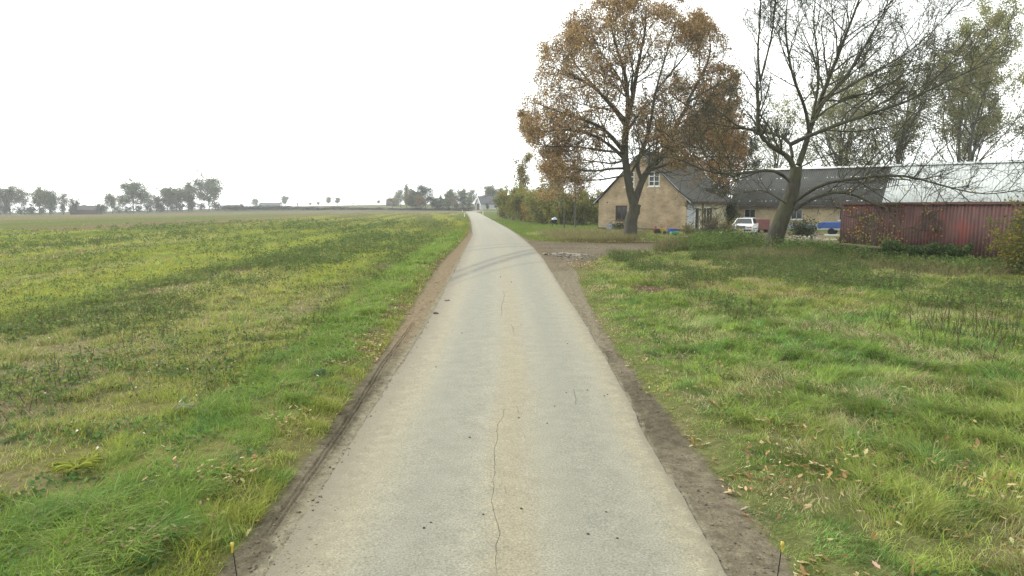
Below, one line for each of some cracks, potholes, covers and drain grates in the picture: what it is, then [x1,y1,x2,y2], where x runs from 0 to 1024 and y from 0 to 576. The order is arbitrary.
crack [491,405,519,568]
